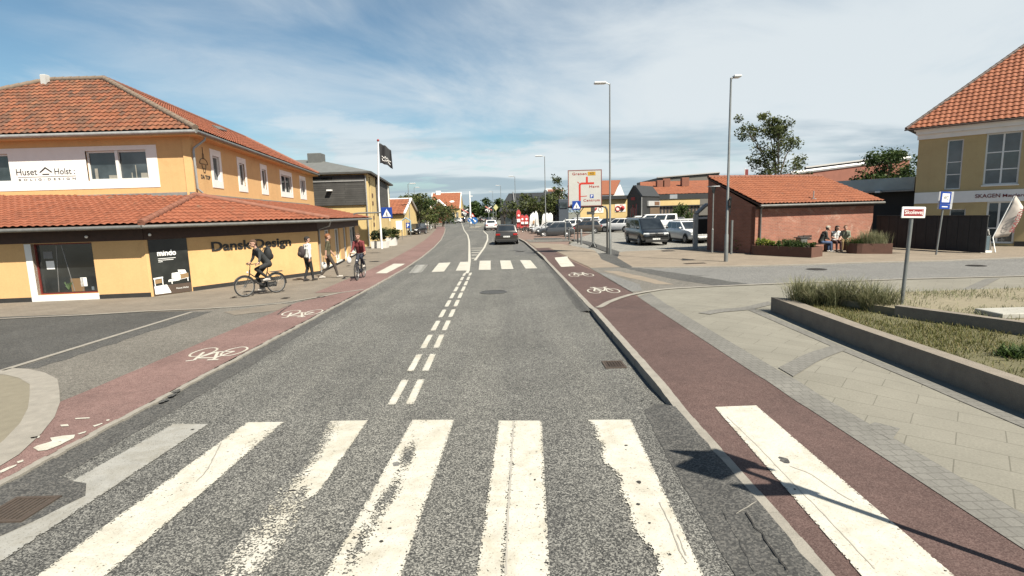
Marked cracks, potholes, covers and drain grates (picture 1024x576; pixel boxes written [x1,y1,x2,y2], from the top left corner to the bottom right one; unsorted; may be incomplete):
drain grate [0,495,62,523]
drain grate [601,360,627,369]
crack [659,502,687,563]
crack [736,501,788,570]
